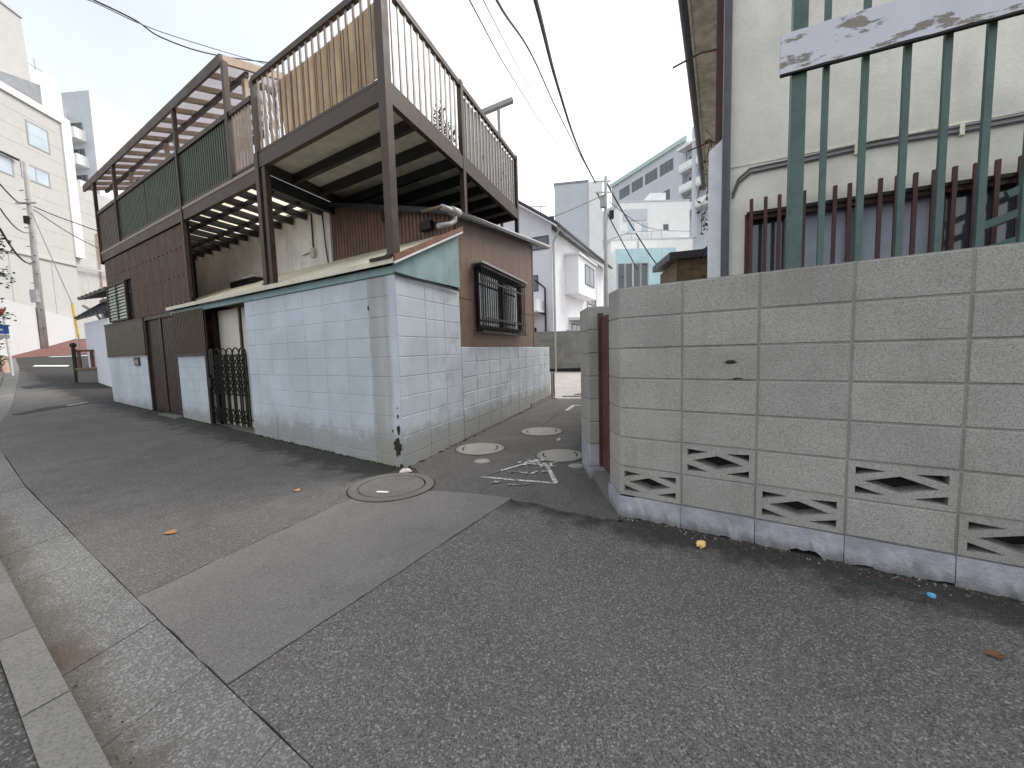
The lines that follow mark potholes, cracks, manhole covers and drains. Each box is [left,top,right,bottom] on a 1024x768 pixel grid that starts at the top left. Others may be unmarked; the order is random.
manhole cover [346,473,436,503]
manhole cover [535,449,582,462]
manhole cover [520,427,563,436]
manhole cover [455,443,505,455]
